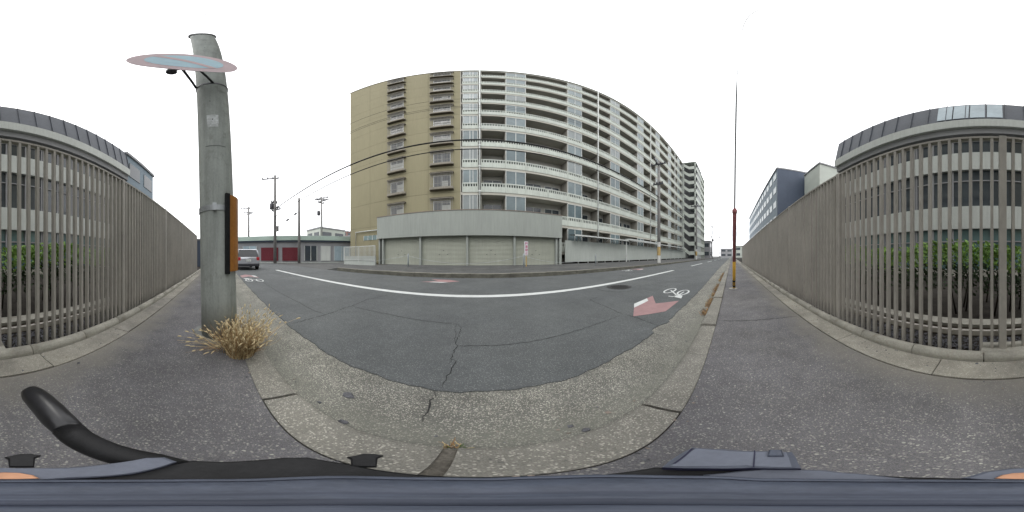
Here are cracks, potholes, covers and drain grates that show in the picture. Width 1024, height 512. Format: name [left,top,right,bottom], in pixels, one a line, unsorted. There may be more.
crack [266,284,656,422]
